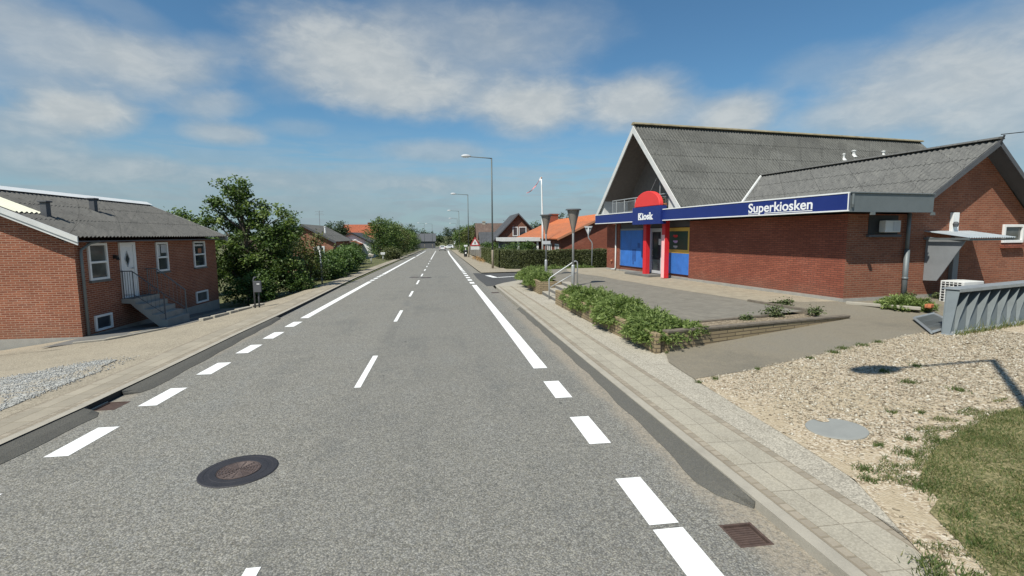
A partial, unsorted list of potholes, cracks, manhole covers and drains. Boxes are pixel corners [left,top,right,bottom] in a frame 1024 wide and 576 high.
drain grate [719,522,774,548]
manhole cover [196,455,279,488]
drain grate [94,401,131,411]
